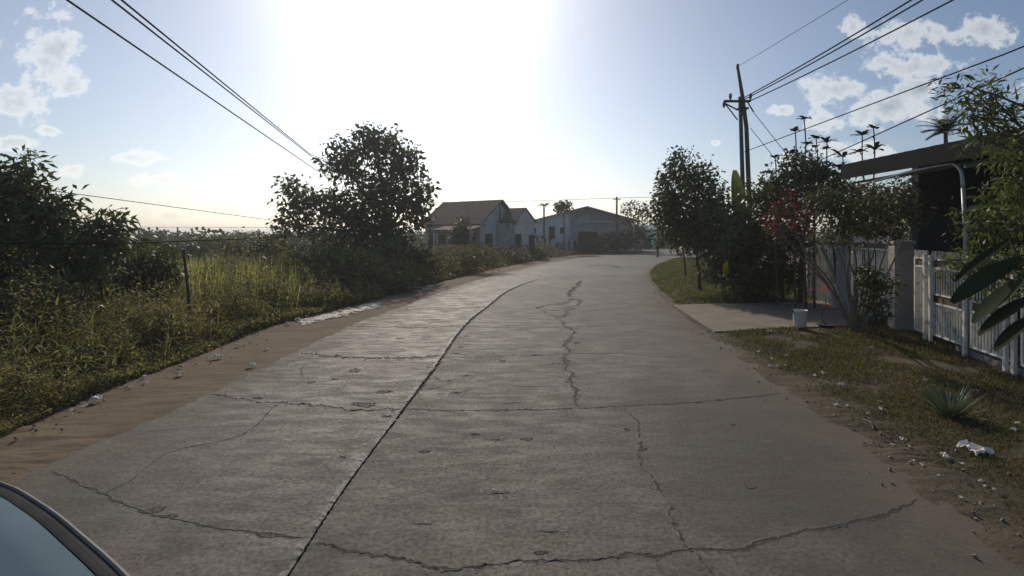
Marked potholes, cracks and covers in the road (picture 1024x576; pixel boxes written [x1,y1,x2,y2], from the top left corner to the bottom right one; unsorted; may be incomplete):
crack [535,265,623,365]
crack [106,403,279,493]
crack [624,409,715,576]
